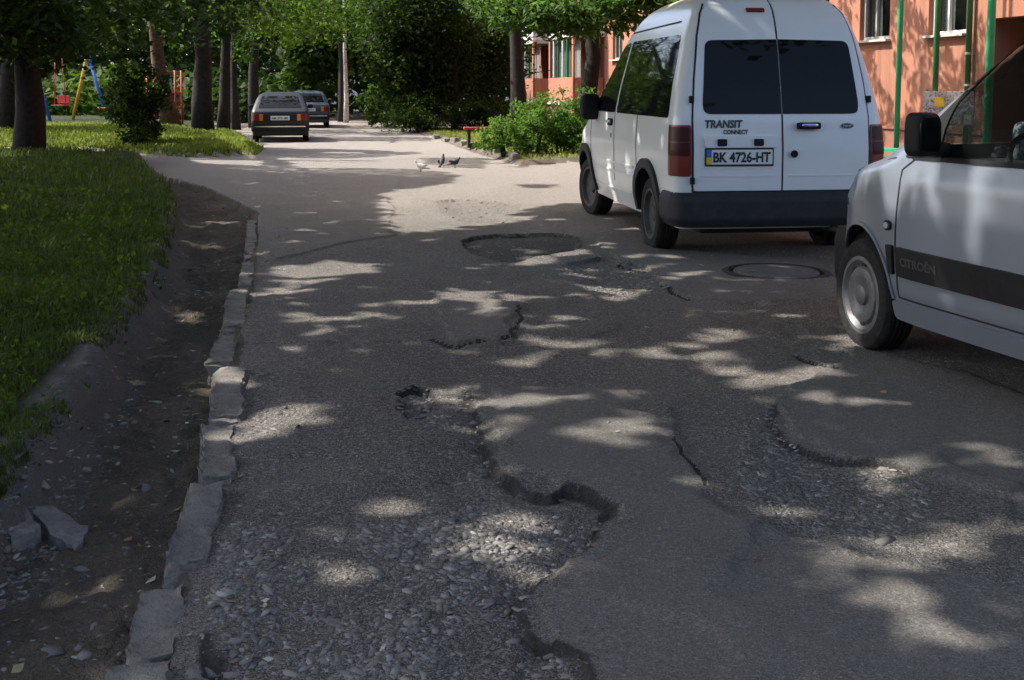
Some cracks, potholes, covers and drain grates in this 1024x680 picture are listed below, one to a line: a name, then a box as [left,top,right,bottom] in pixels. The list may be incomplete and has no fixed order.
crack [672,436,707,487]
pothole [461,233,584,263]
pothole [733,405,937,542]
crack [430,304,525,350]
crack [793,356,839,369]
manhole cover [722,263,832,279]
crack [618,264,692,301]
pothole [198,388,617,680]
